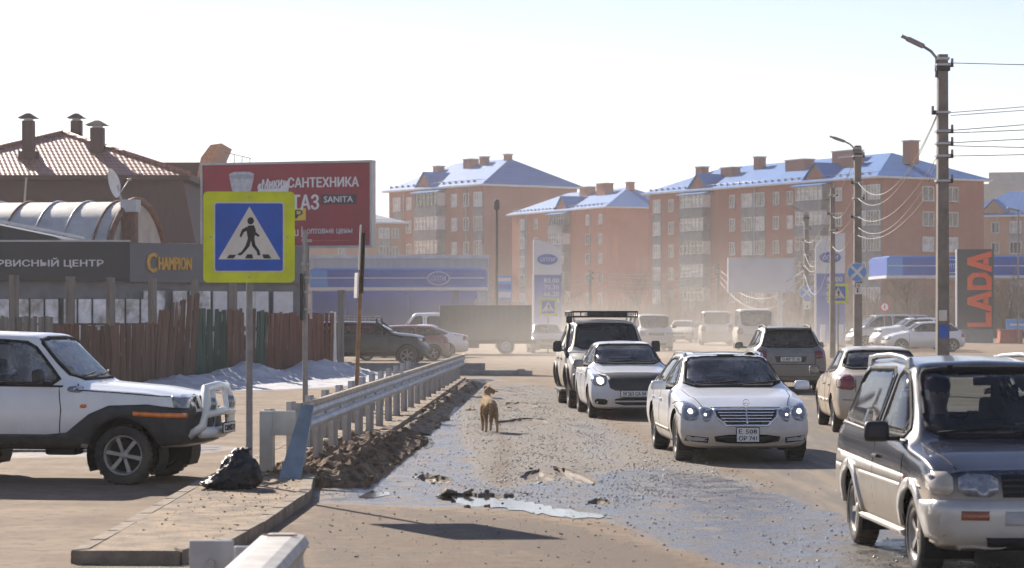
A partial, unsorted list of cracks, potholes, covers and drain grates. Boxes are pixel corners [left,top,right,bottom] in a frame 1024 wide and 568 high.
pothole [521,467,560,483]
pothole [412,472,453,484]
pothole [435,488,514,508]
